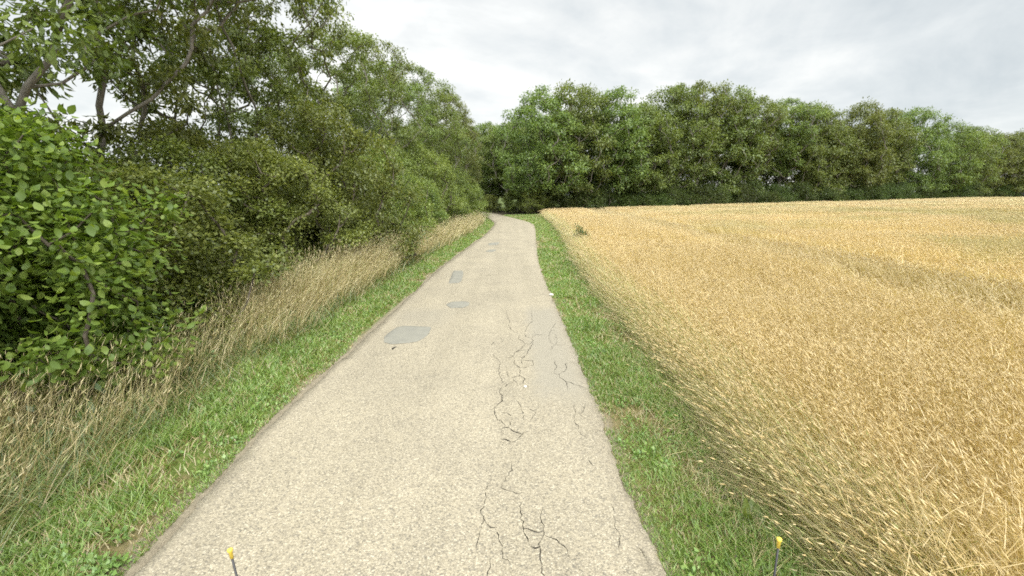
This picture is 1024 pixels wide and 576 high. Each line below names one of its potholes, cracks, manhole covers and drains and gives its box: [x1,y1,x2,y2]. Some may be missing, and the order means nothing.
crack [491,309,586,442]
crack [476,464,570,576]
